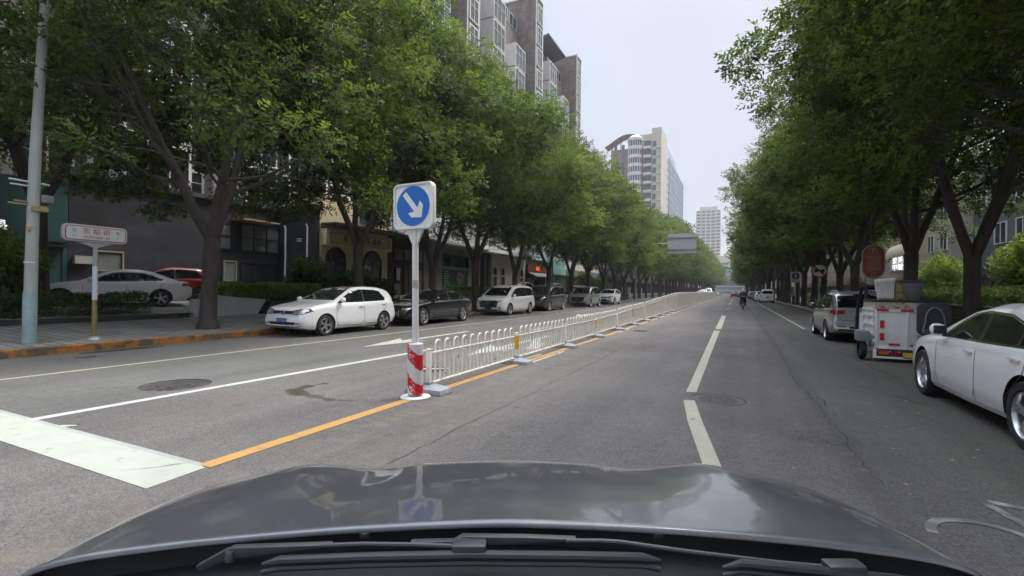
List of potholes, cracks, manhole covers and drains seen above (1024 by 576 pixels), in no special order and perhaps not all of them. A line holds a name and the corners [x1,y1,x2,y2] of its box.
crack [713,321,884,486]
manhole cover [686,393,751,407]
crack [385,378,560,465]
manhole cover [138,380,212,391]
